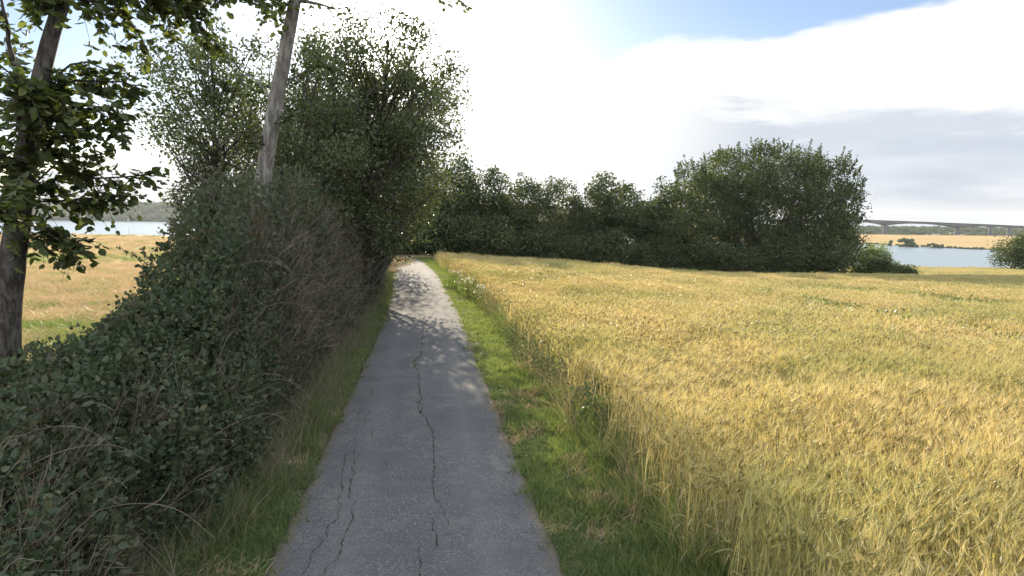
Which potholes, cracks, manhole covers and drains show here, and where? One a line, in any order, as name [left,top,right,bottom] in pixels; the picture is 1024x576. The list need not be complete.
crack [413,328,449,576]
crack [301,410,373,576]
